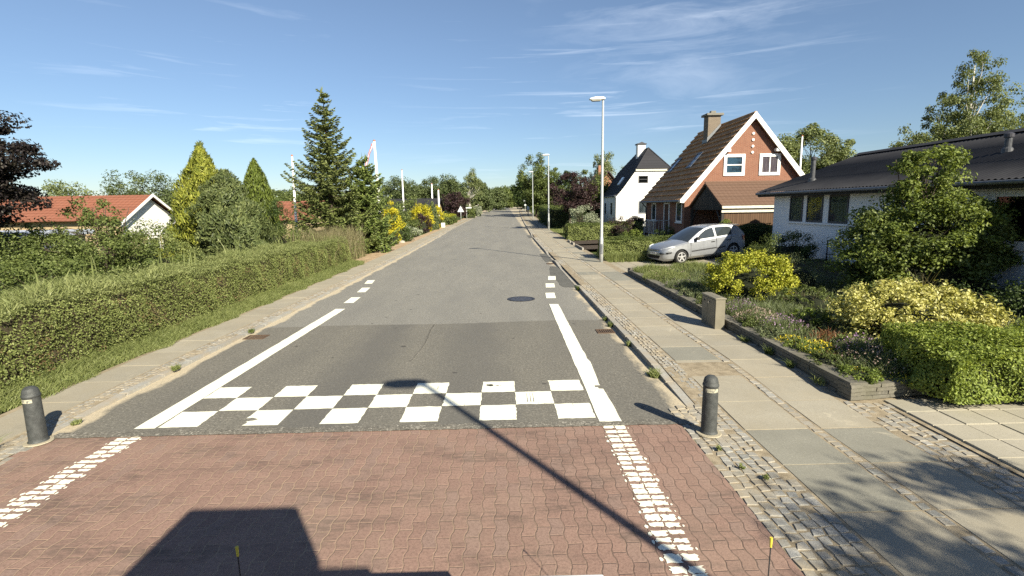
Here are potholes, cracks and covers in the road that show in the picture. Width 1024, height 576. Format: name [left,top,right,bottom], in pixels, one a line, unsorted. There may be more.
crack [410,324,436,361]
